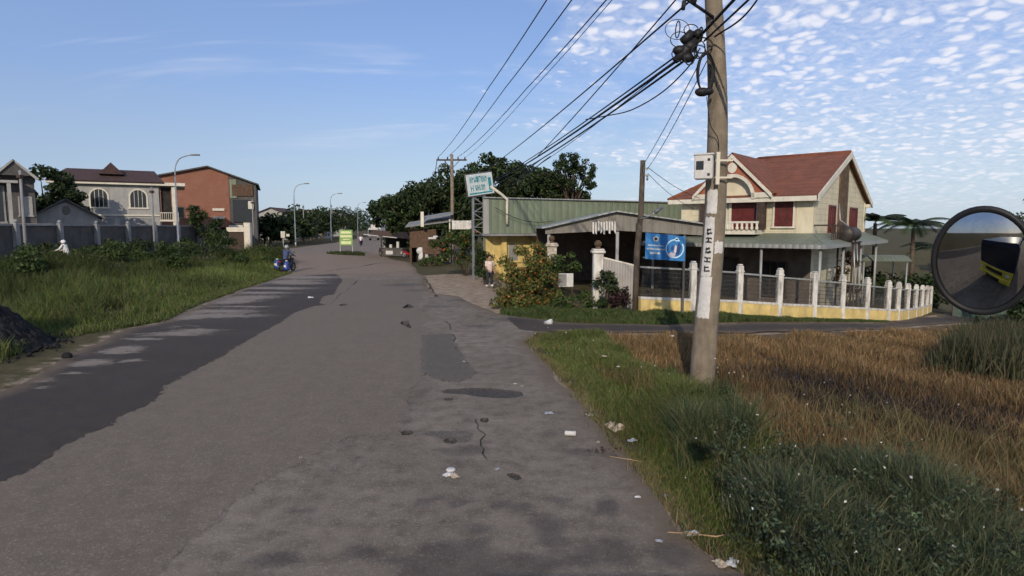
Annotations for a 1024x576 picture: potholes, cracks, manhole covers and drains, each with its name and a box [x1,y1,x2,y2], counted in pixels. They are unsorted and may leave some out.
crack [475,418,489,461]
